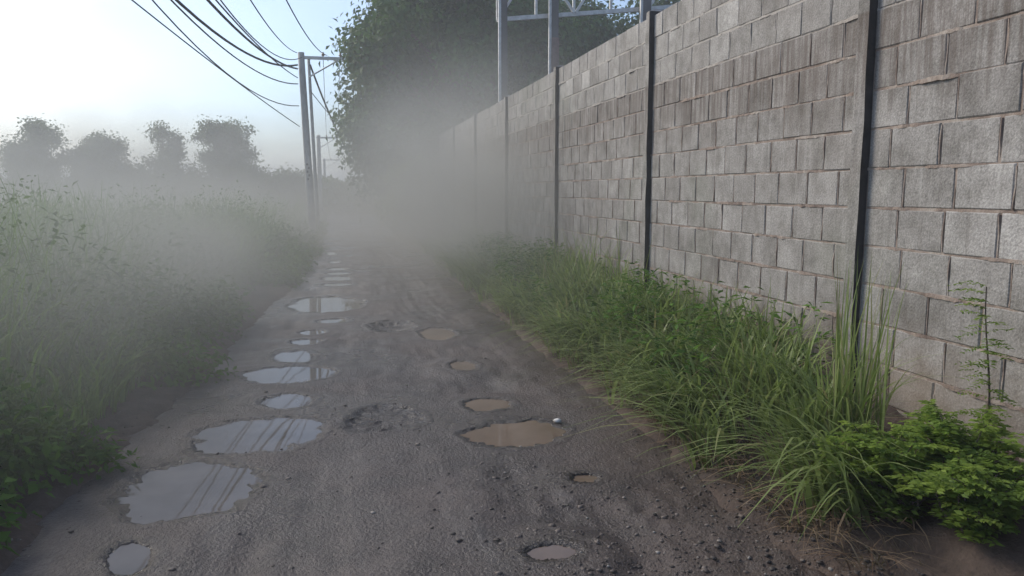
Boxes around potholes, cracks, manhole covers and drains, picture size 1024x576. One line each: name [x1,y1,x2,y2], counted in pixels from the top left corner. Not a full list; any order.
pothole [265,348,323,364]
pothole [280,296,371,314]
pothole [413,326,463,341]
pothole [233,363,345,386]
pothole [96,456,277,531]
pothole [361,319,423,333]
pothole [440,358,484,372]
pothole [85,534,172,576]
pothole [178,413,338,457]
pothole [508,535,595,568]
pothole [250,390,325,412]
pothole [559,468,613,487]
